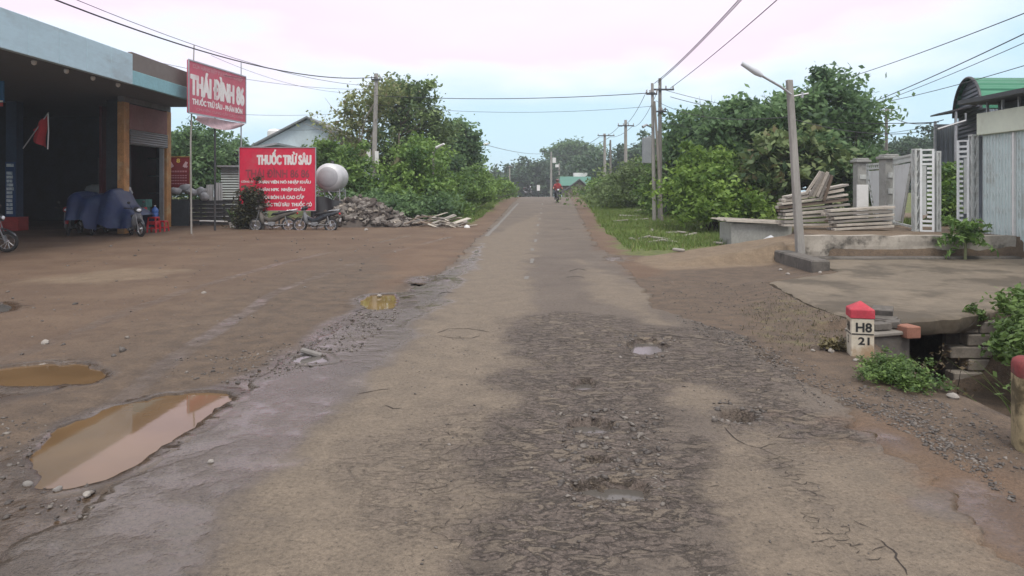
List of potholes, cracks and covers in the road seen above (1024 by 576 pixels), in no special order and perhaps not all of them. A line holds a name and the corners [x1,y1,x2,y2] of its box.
pothole [0,357,129,393]
pothole [551,413,631,438]
pothole [613,336,681,358]
crack [518,328,907,574]
pothole [550,471,669,509]
pothole [1,386,251,500]
pothole [339,291,418,314]
pothole [703,404,774,428]
pothole [559,375,609,393]
